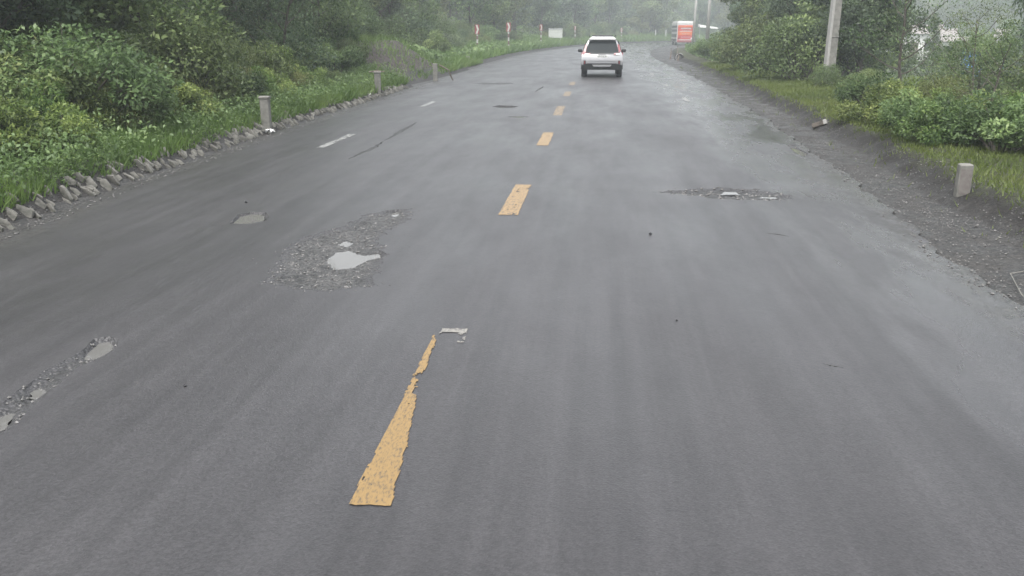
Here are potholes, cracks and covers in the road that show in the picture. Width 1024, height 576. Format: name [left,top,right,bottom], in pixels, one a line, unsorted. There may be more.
crack [349,122,417,159]
pothole [229,212,269,224]
pothole [252,208,415,293]
pothole [658,187,794,201]
pothole [0,337,119,434]
